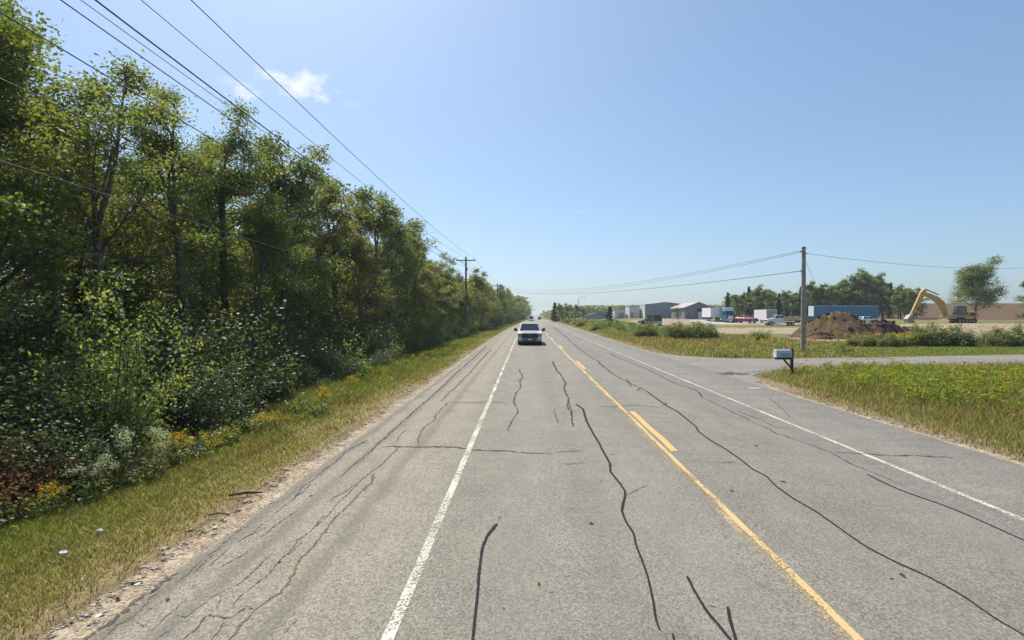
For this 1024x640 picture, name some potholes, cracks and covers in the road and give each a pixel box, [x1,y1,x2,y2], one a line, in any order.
crack [552,328,943,485]
crack [84,349,577,640]
